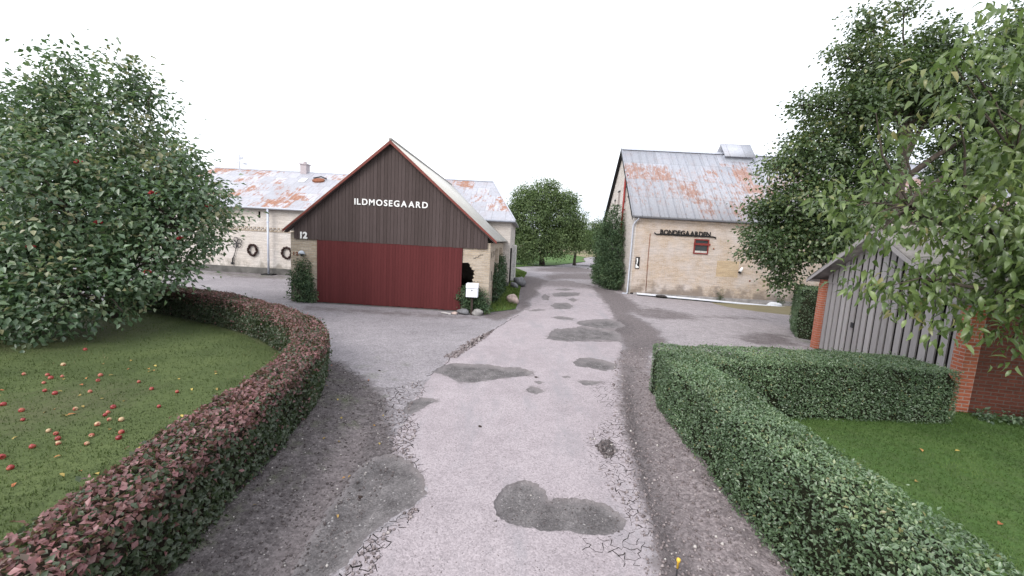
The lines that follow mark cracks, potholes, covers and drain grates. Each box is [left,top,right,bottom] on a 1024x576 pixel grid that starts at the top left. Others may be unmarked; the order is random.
crack [339,506,420,576]
crack [380,316,516,473]
crack [579,381,653,567]
